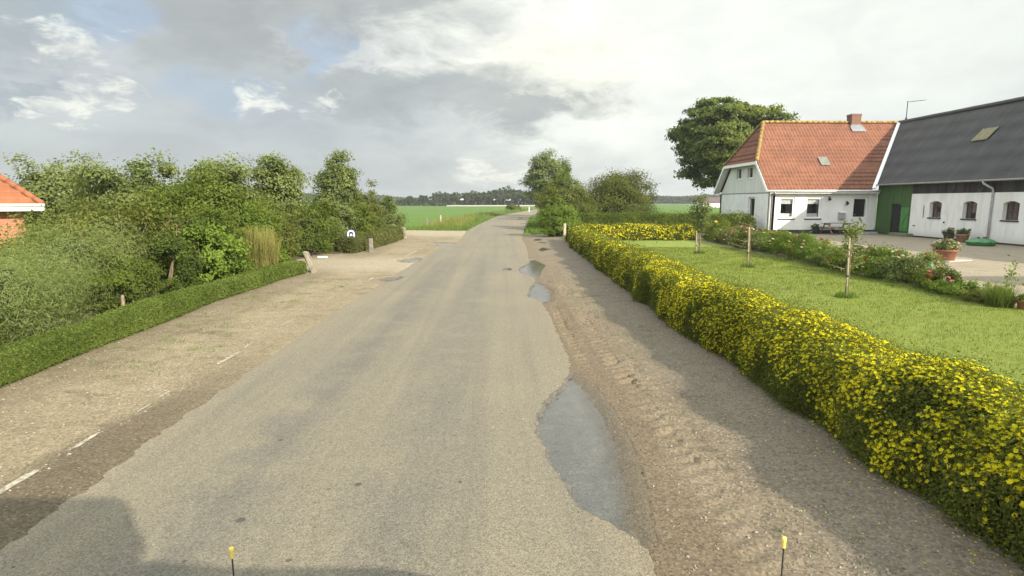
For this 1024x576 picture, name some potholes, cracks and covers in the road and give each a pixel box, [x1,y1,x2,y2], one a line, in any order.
pothole [527,282,556,303]
pothole [518,259,548,279]
pothole [534,371,658,550]
